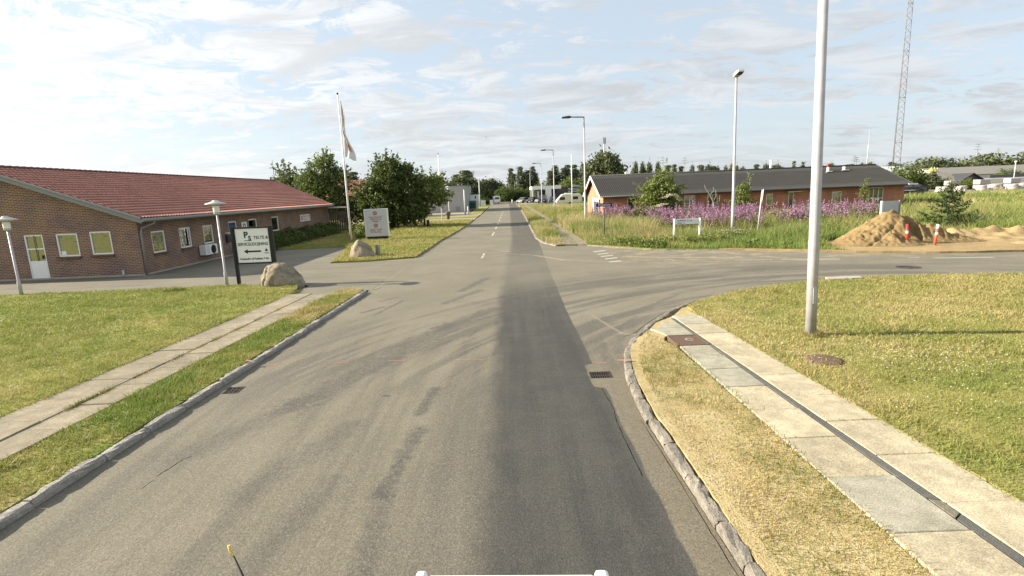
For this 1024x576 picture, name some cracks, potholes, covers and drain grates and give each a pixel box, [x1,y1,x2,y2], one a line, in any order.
manhole cover [667,335,709,349]
manhole cover [804,354,845,366]
